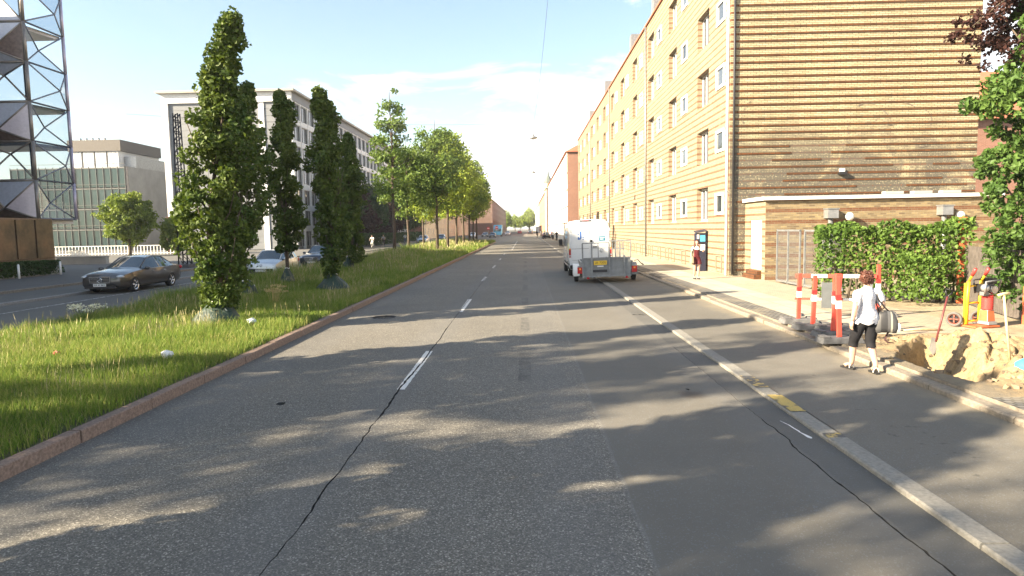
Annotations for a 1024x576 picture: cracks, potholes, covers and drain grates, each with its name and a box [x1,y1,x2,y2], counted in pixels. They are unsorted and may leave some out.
crack [259,272,490,576]
crack [676,349,956,576]
